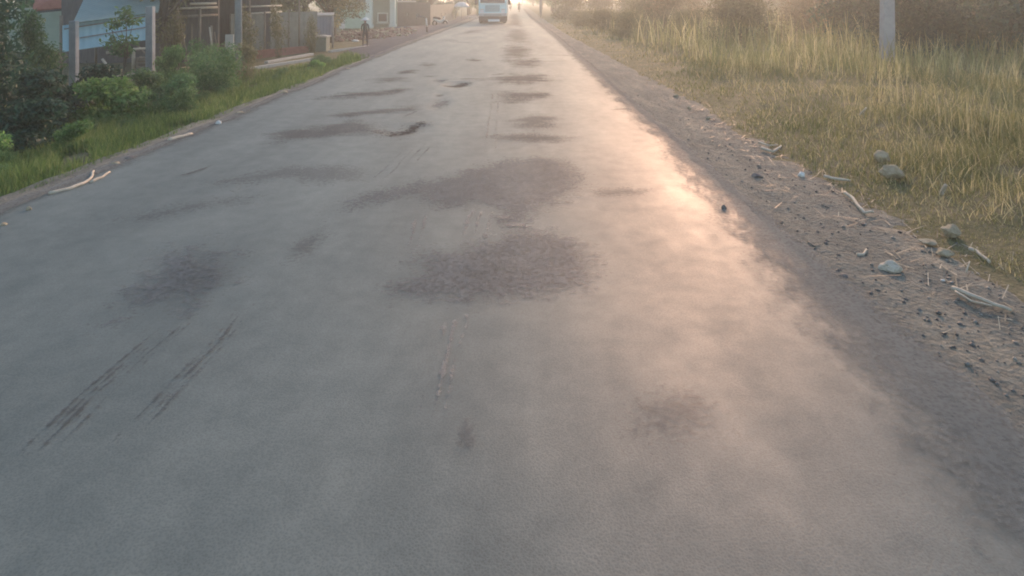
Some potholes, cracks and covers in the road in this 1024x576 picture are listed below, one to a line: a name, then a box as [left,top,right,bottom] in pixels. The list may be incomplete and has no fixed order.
pothole [375,121,431,136]
